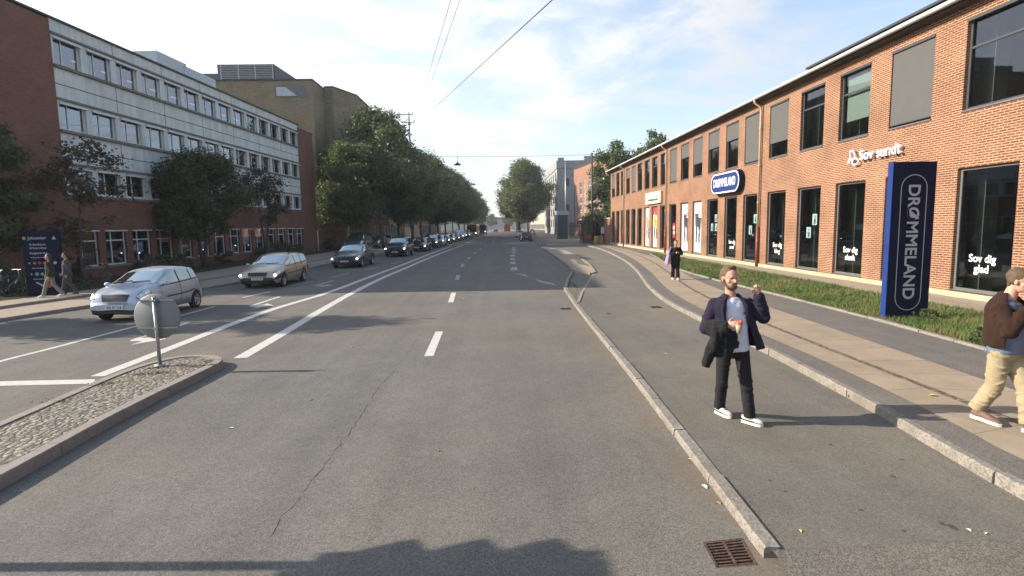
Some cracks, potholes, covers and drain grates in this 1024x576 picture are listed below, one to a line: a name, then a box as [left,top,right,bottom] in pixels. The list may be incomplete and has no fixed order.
drain grate [703,538,758,568]
crack [270,346,412,537]
